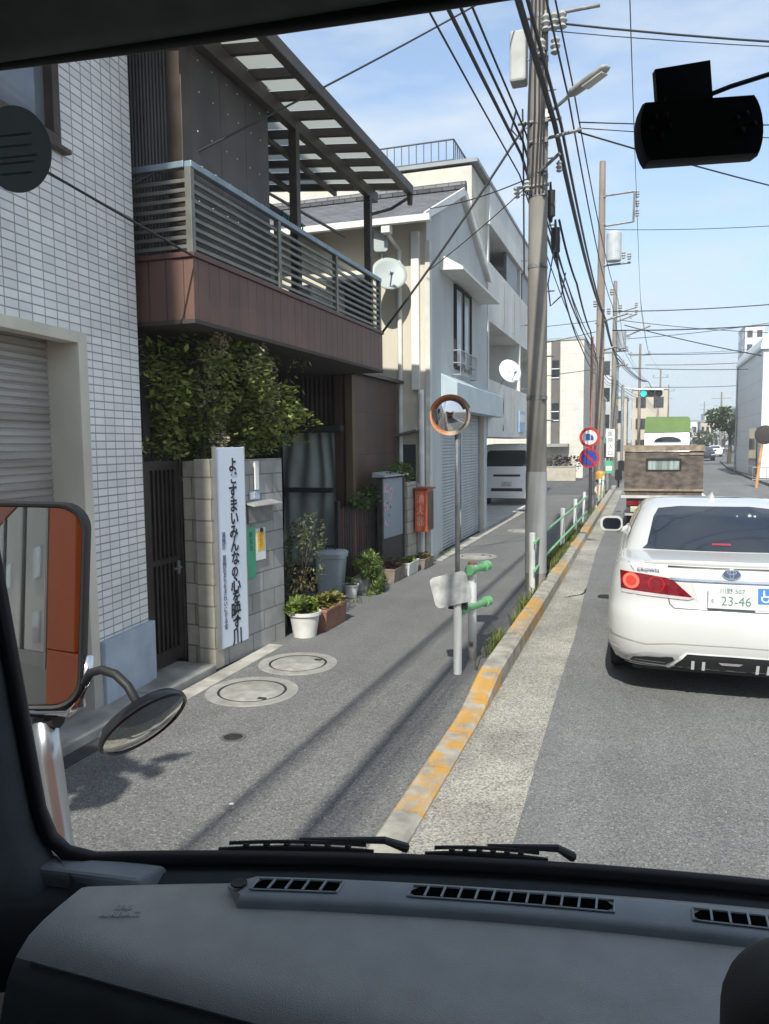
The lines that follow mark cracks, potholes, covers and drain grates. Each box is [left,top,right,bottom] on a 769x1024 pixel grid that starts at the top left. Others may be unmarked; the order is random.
manhole cover [205,677,299,707]
manhole cover [258,652,338,676]
utility cover [221,732,246,742]
